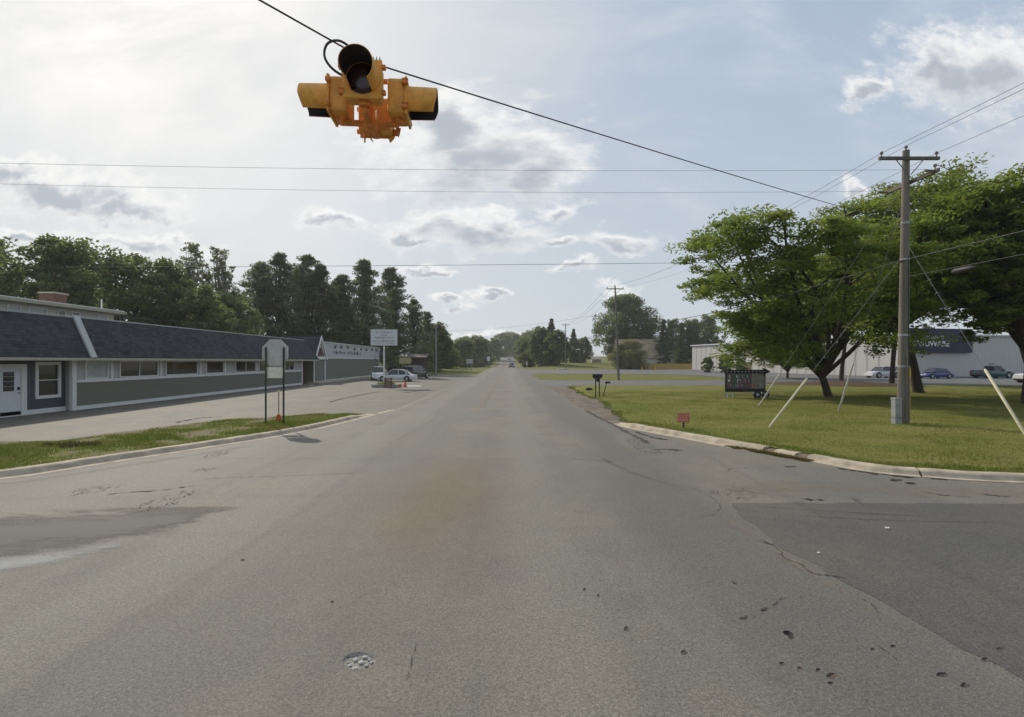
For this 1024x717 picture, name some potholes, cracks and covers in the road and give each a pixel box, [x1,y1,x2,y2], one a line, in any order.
crack [64,450,339,512]
crack [763,540,845,578]
crack [587,411,678,455]
